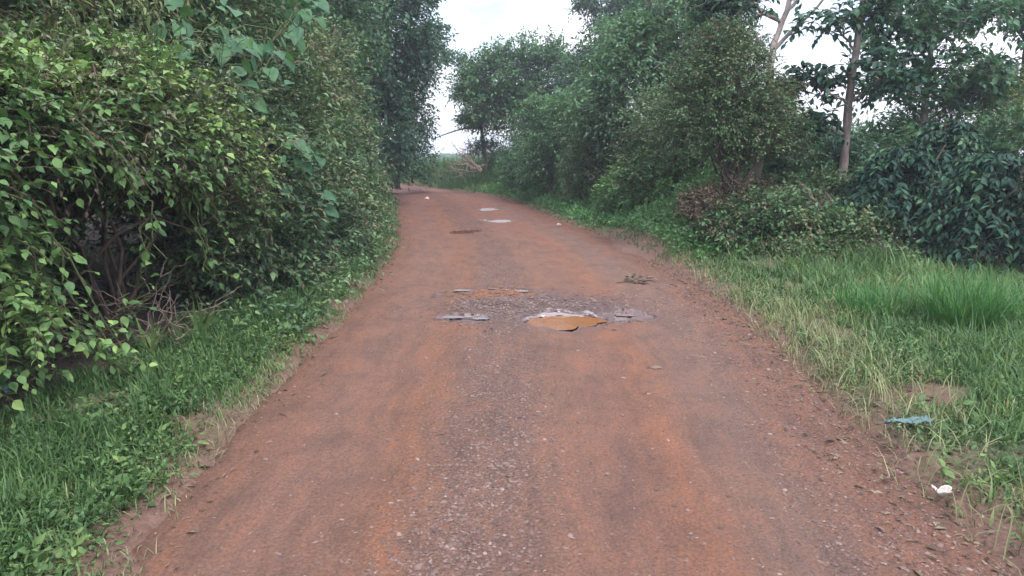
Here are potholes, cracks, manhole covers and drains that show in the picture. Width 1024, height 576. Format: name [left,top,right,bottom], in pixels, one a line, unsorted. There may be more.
pothole [429,286,551,300]
pothole [513,308,616,333]
pothole [596,306,661,324]
pothole [430,312,497,323]
